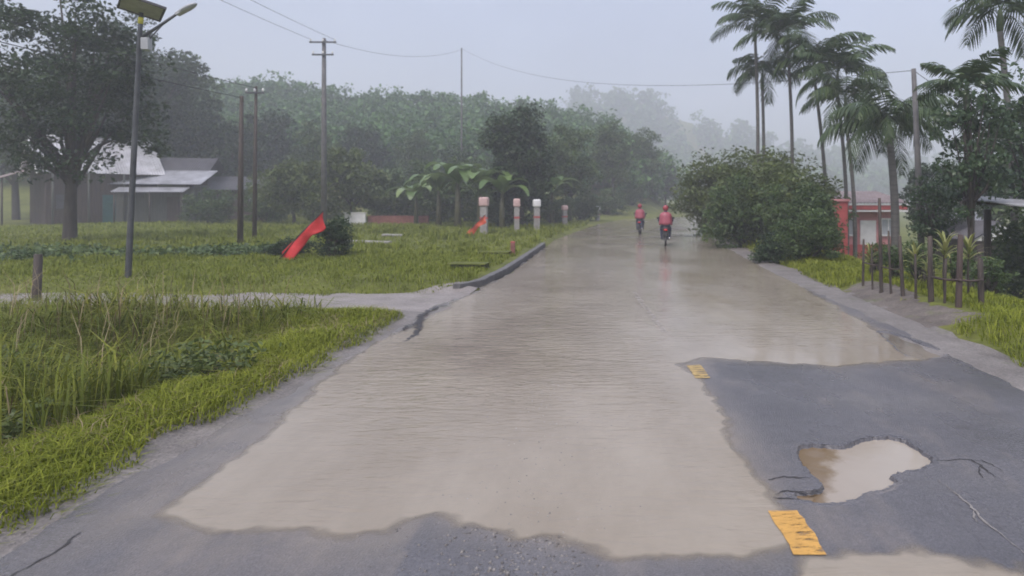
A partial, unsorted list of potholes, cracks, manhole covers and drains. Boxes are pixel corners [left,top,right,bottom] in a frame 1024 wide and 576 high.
crack [939,458,1024,553]
crack [10,532,80,576]
pothole [783,434,939,506]
